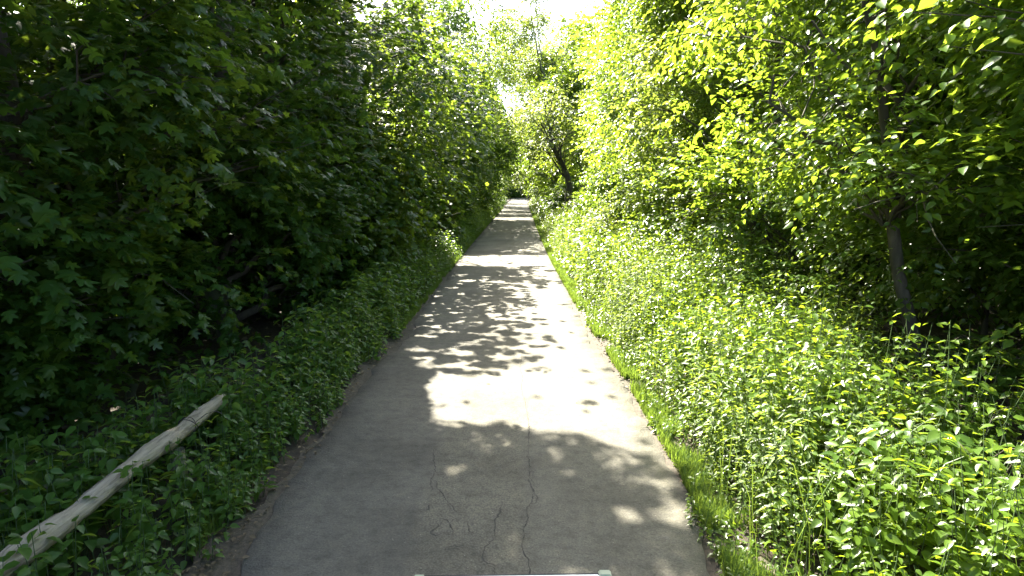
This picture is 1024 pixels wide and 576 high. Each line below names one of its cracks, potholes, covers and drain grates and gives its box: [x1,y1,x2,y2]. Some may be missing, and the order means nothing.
crack [426,353,540,574]
